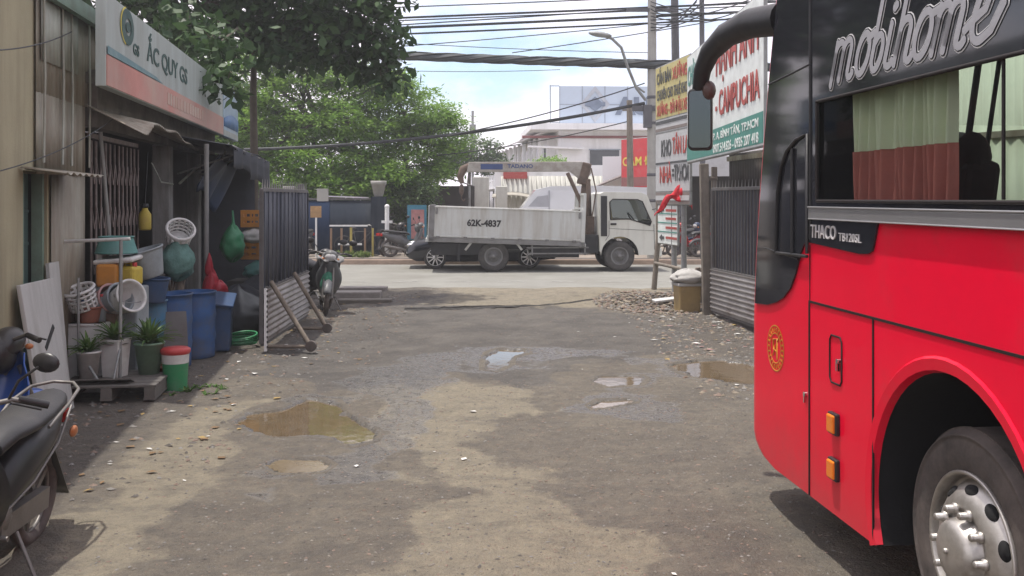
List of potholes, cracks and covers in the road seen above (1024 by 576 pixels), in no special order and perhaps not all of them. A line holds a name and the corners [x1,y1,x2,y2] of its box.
pothole [227,396,384,449]
pothole [662,358,754,387]
pothole [584,397,642,410]
pothole [479,347,533,372]
pothole [256,455,338,475]
pothole [586,374,652,388]
